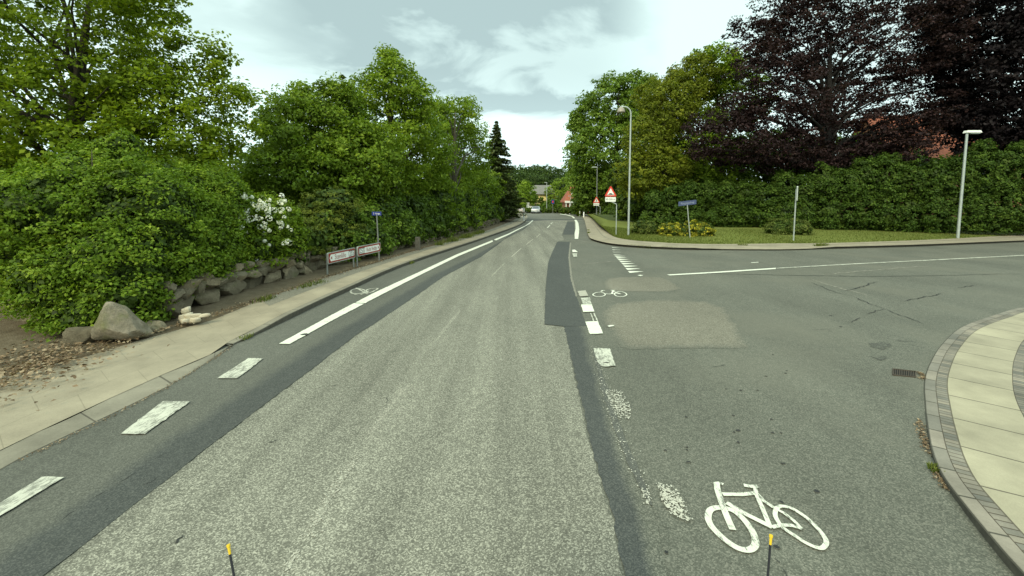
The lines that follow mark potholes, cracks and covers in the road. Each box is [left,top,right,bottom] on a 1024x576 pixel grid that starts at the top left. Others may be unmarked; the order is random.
crack [816,282,937,323]
drain grate [892,368,917,378]
